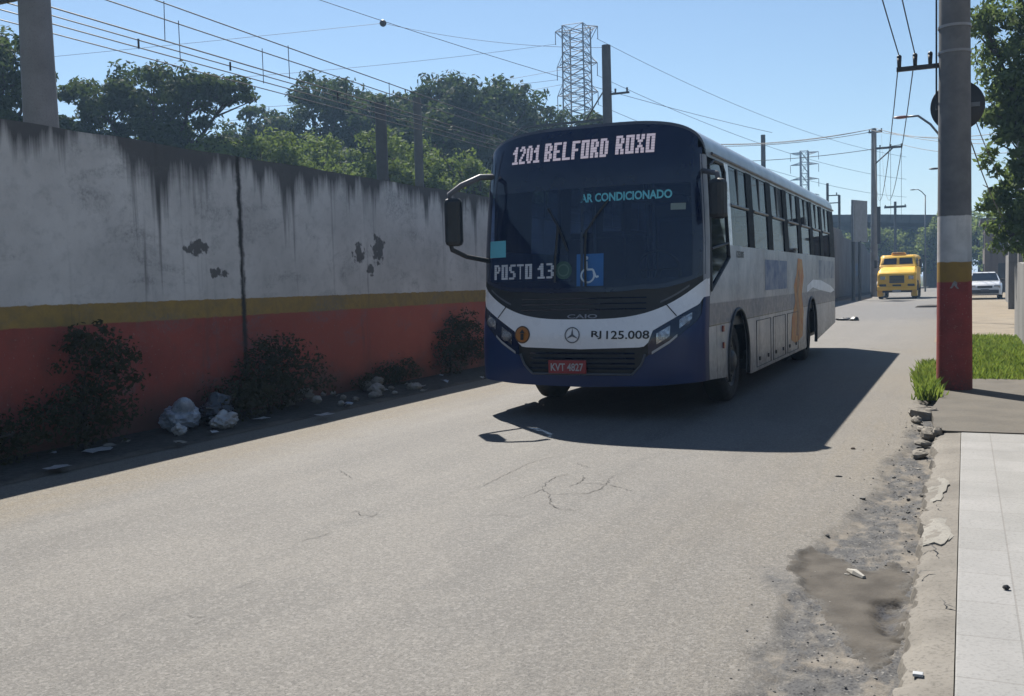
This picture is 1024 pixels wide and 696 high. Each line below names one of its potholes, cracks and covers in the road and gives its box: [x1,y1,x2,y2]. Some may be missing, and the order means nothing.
crack [519,463,632,509]
